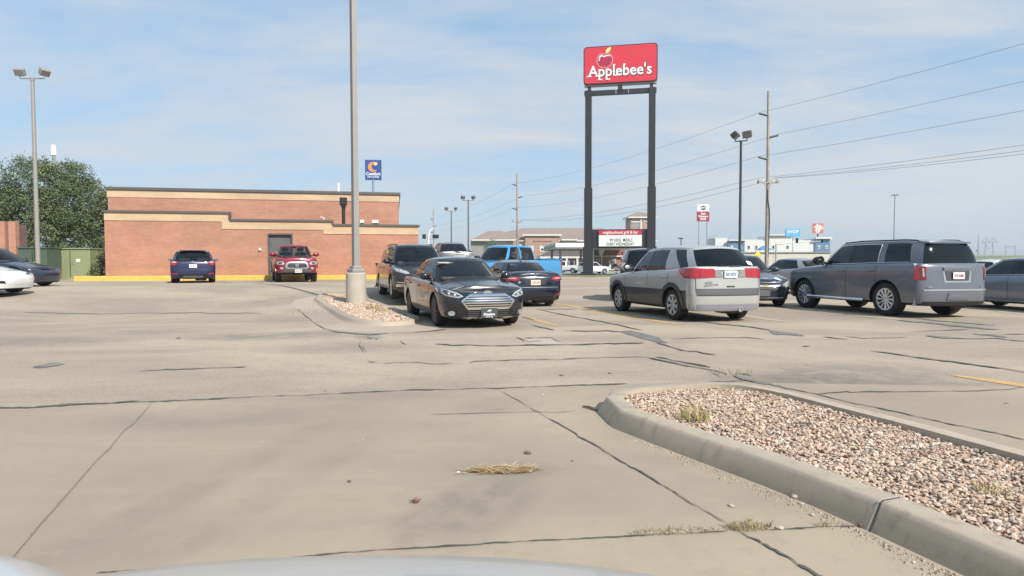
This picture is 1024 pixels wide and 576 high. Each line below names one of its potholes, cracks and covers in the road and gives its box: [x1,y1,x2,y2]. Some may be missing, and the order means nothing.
crack [445,309,1024,439]
